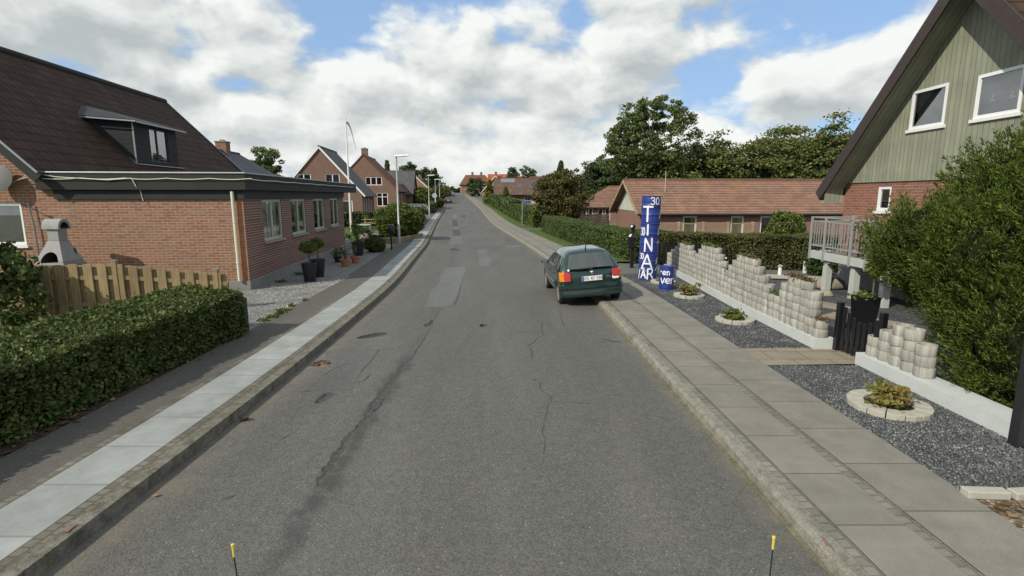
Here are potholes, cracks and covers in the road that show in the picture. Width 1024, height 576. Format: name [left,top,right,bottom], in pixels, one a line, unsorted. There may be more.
pothole [315,392,336,404]
crack [316,286,461,486]
